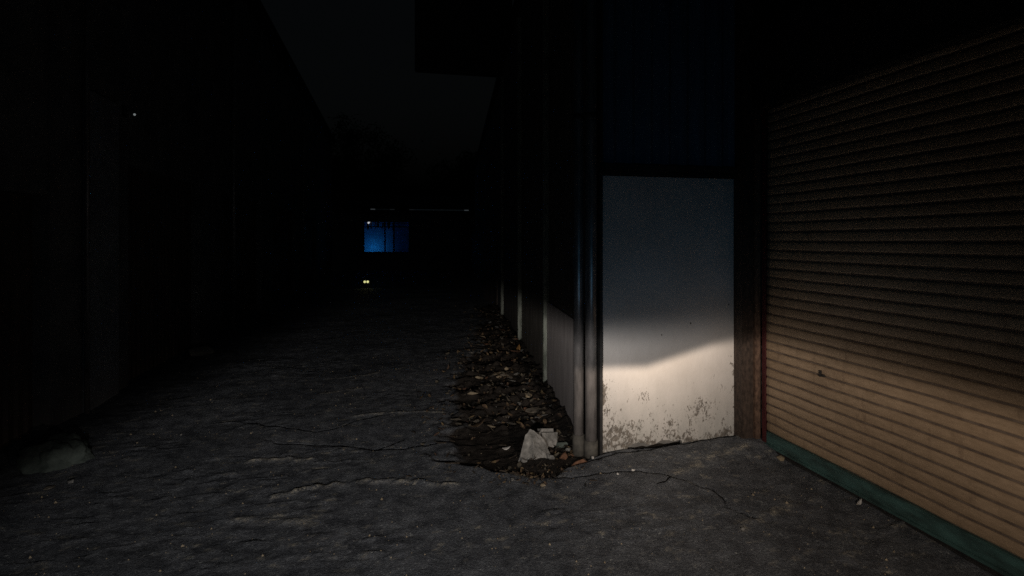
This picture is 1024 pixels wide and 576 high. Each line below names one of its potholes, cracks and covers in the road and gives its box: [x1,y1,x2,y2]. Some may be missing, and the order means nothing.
crack [575,436,733,484]
